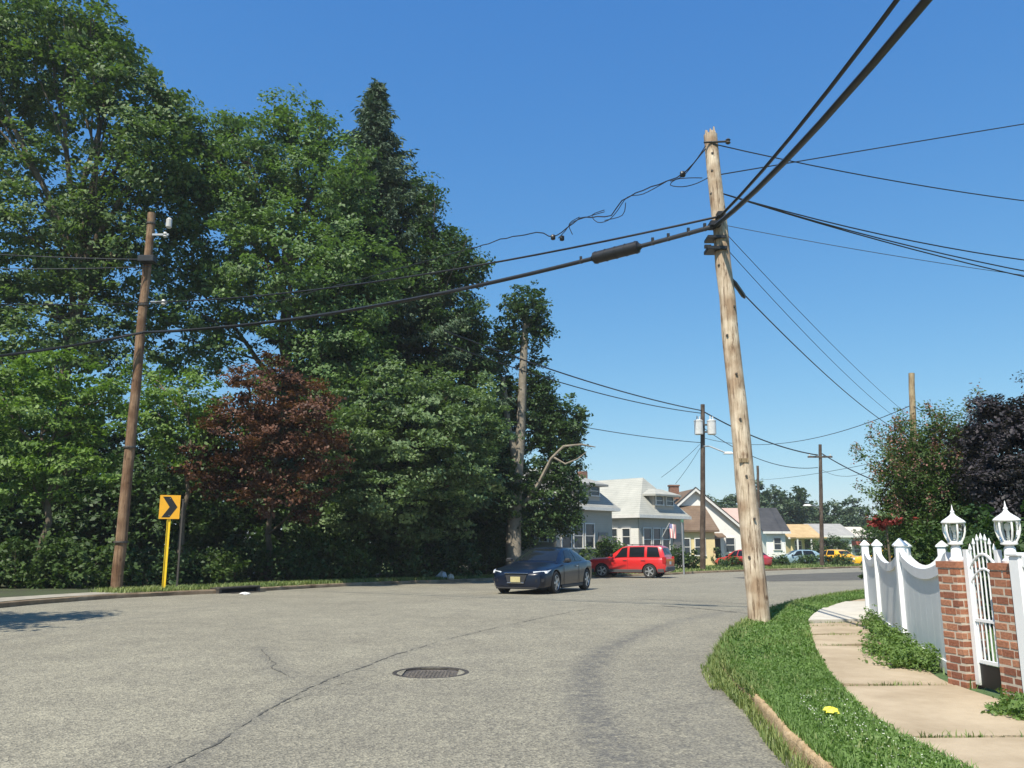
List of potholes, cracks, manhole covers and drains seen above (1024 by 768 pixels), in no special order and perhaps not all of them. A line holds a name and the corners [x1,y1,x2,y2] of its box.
drain grate [208,585,266,594]
manhole cover [377,666,479,680]
crack [166,610,578,768]
